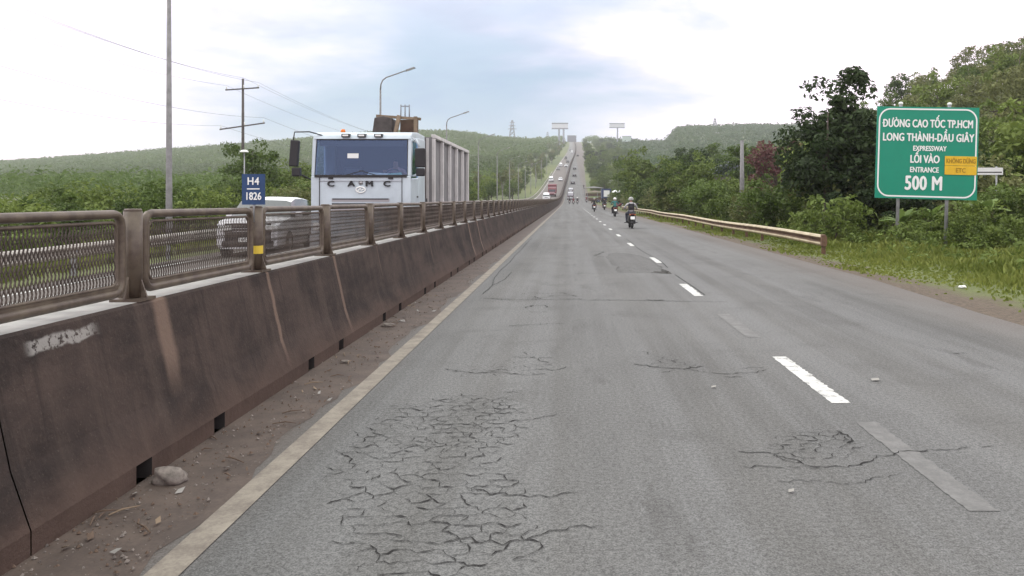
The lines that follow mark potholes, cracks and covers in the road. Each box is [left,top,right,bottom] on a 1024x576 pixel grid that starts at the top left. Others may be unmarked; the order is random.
crack [637,351,763,377]
crack [323,391,605,576]
crack [485,238,723,326]
crack [741,430,992,484]
crack [444,352,562,376]
